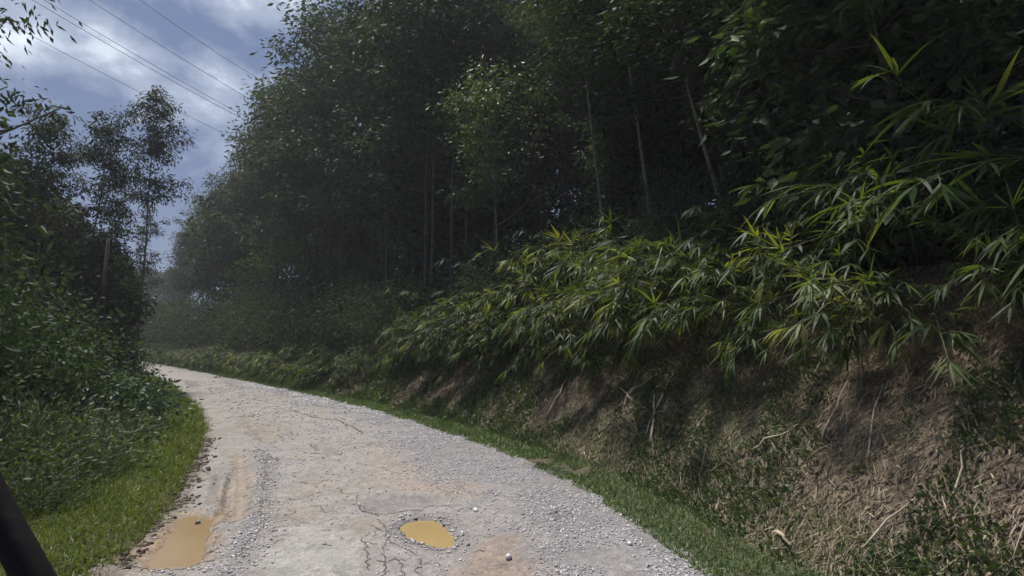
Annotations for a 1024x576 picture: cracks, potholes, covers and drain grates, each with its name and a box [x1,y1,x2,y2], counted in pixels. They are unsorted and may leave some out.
pothole [386,512,470,554]
pothole [131,507,232,576]
crack [293,409,363,433]
crack [223,415,440,576]
